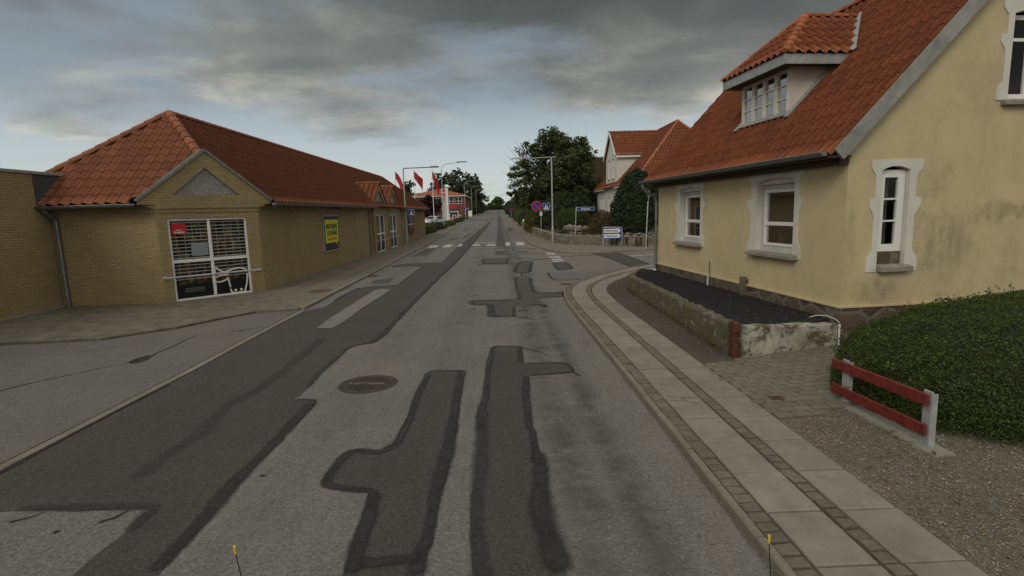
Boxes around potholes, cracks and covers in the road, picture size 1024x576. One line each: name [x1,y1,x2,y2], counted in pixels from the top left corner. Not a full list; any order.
manhole cover [337,375,398,394]
pothole [128,355,154,364]
crack [0,339,187,391]
